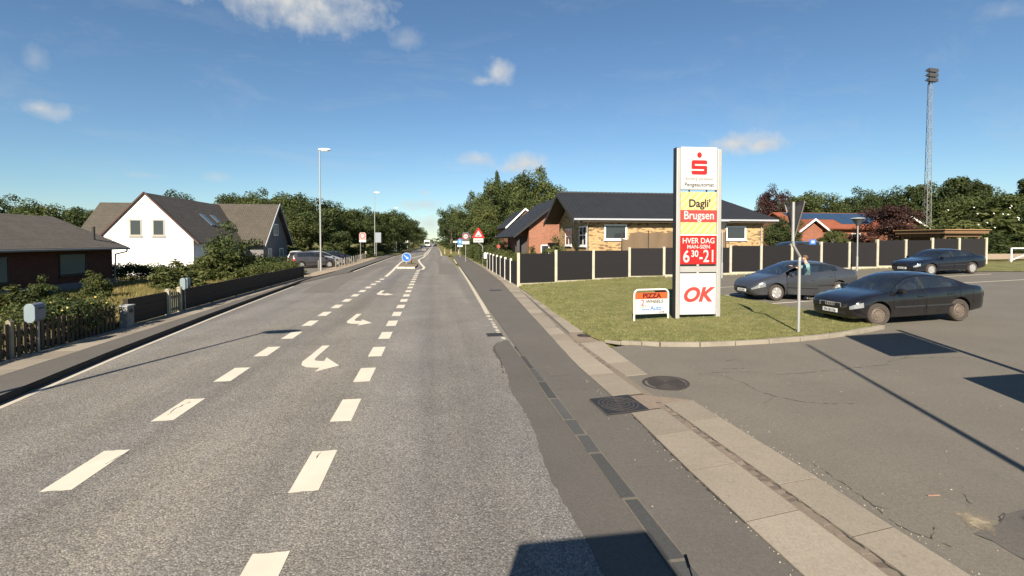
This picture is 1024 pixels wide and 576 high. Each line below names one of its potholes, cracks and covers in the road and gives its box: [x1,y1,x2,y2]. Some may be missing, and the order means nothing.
crack [813,463,952,547]
crack [705,355,969,404]
manhole cover [642,376,690,391]
